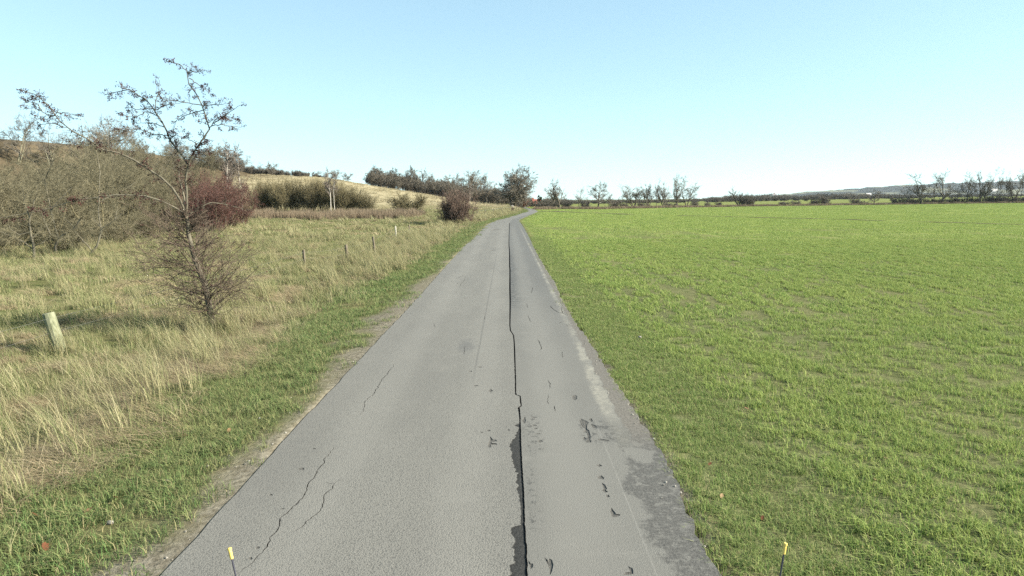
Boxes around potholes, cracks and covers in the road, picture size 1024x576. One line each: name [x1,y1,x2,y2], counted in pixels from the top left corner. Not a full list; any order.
pothole [579,419,591,443]
crack [238,447,336,574]
